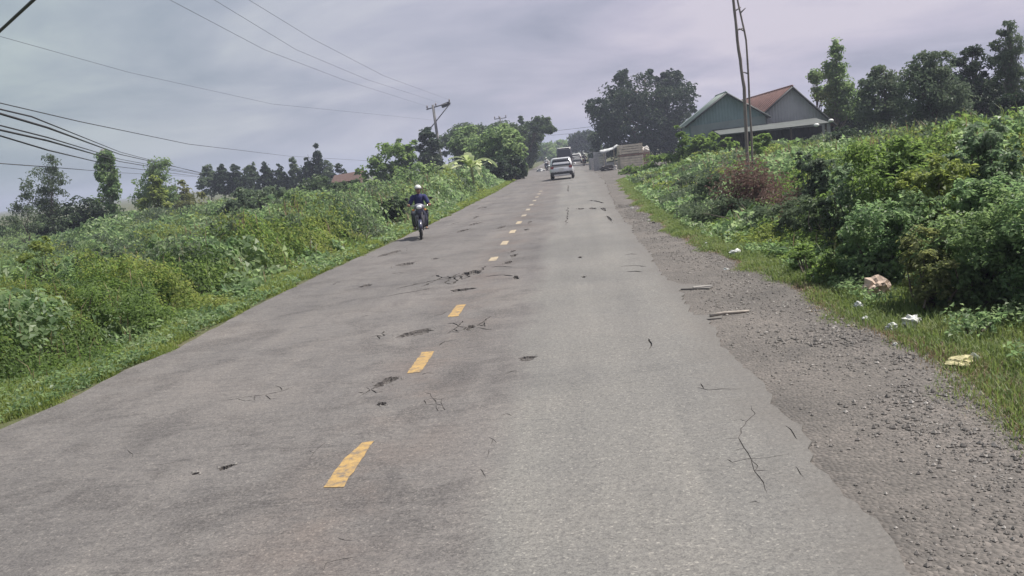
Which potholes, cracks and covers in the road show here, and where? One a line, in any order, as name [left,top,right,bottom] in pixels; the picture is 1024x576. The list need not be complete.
crack [390,266,512,296]
pothole [369,376,403,390]
crack [439,313,492,346]
crack [727,407,786,503]
pothole [393,327,440,338]
